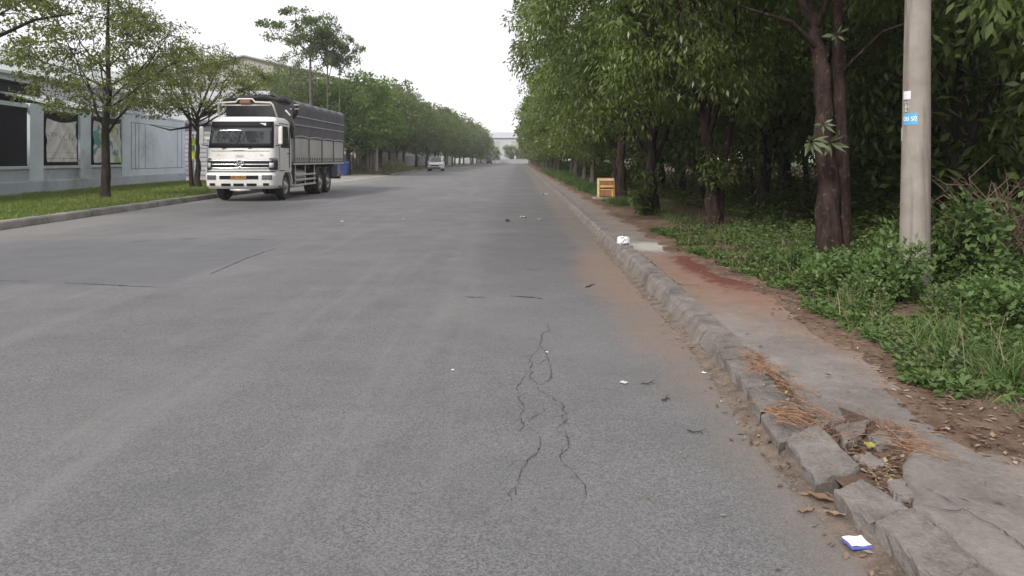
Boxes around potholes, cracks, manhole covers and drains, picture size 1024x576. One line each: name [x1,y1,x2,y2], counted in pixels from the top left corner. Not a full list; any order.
crack [508,325,587,503]
